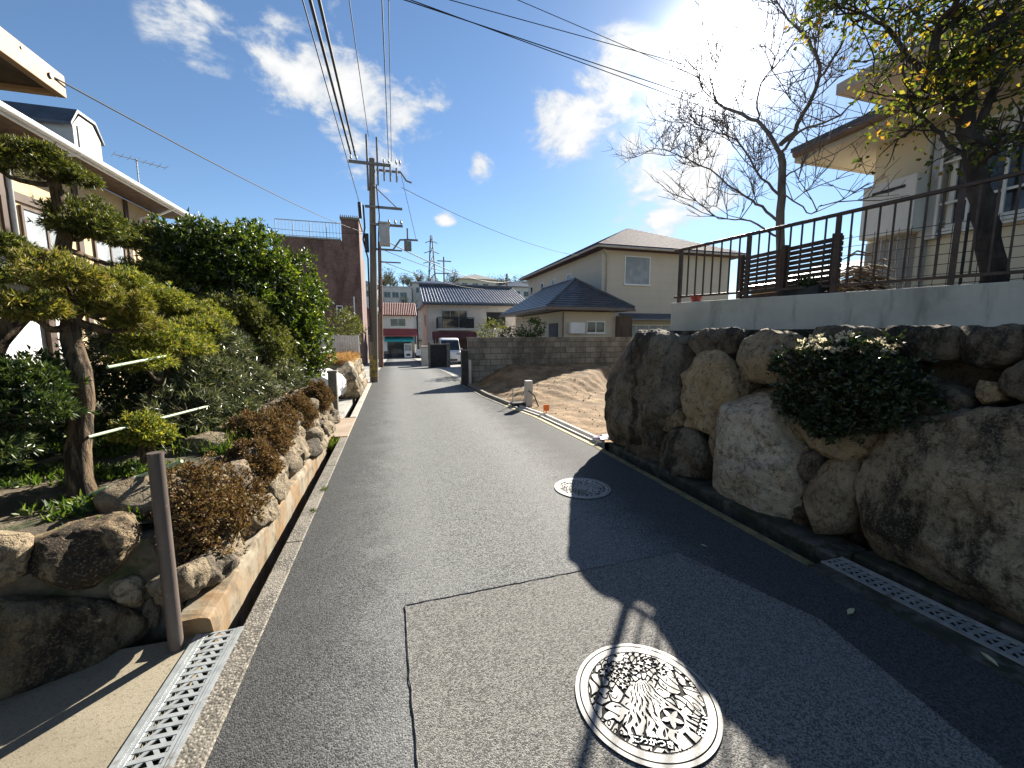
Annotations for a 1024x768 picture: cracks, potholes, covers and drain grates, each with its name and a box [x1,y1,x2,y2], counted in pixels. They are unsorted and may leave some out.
drain grate [109,626,244,768]
drain grate [821,557,1024,666]
manhole cover [554,478,611,499]
manhole cover [575,644,723,768]
